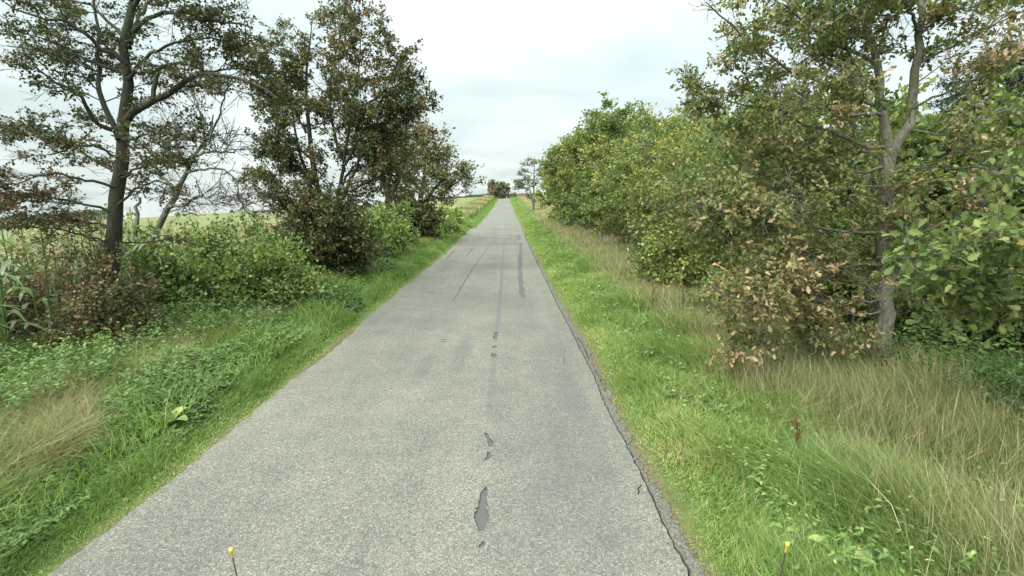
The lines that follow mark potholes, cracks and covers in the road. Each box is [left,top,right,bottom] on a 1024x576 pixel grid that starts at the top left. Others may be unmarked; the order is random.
pothole [474,486,490,531]
crack [525,237,691,576]
crack [427,248,488,301]
